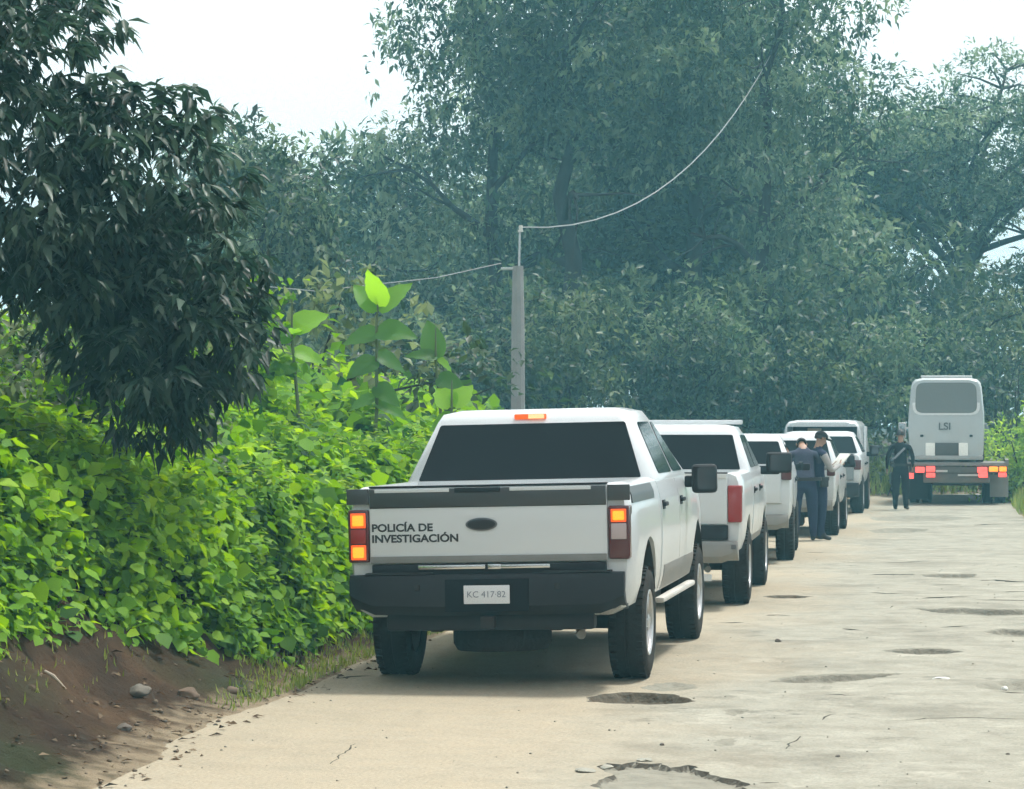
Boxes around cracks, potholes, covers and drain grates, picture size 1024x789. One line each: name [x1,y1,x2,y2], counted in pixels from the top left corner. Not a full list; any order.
pothole [586,692,693,705]
pothole [590,762,750,789]
pothole [916,608,1024,616]
pothole [984,628,1024,637]
pothole [770,673,901,684]
